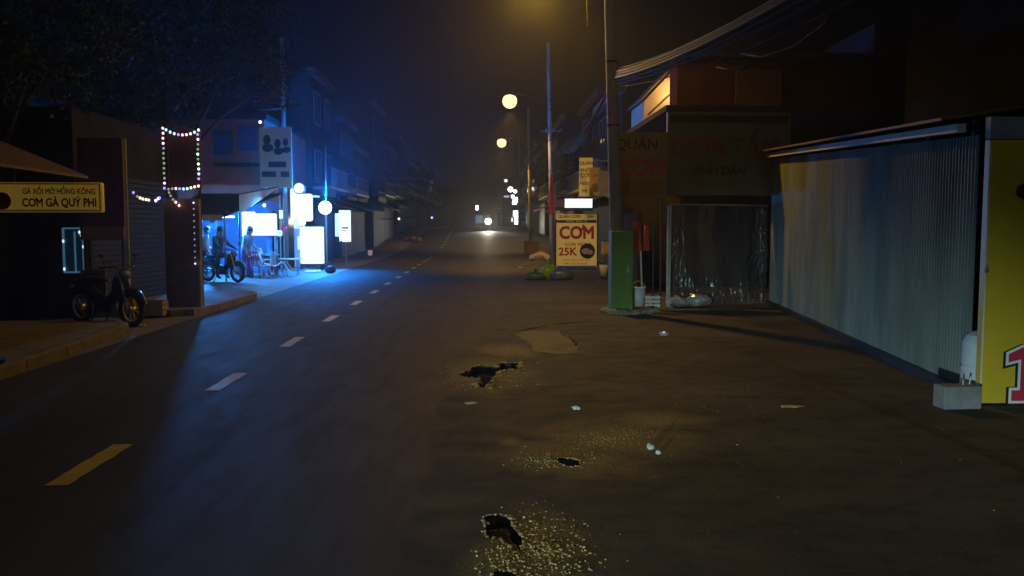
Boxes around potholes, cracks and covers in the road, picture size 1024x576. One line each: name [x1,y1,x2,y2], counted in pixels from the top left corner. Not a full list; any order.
pothole [459,361,524,389]
crack [498,321,596,352]
pothole [481,513,528,555]
pothole [553,457,582,467]
pothole [490,568,519,576]
